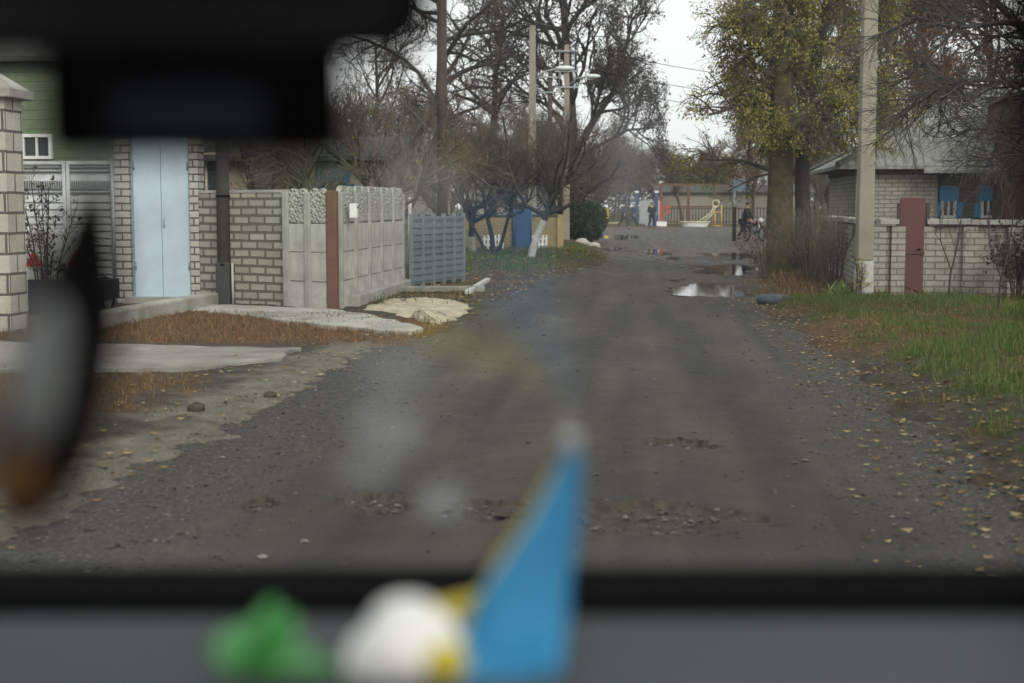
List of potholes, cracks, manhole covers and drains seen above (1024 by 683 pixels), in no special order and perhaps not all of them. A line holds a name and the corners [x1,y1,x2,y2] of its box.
pothole [491,492,807,542]
pothole [405,494,537,531]
pothole [652,281,760,299]
pothole [297,485,453,526]
pothole [678,263,764,278]
pothole [645,251,759,264]
pothole [617,434,750,453]
